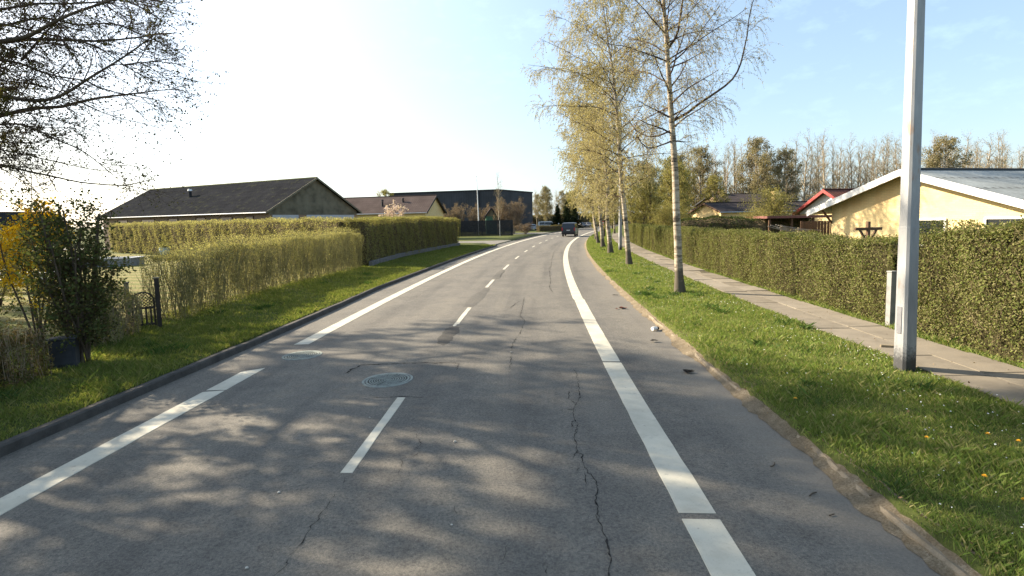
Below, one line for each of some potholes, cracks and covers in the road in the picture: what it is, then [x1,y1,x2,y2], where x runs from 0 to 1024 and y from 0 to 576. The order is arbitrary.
crack [275,479,345,575]
manhole cover [282,350,322,360]
crack [568,368,612,576]
manhole cover [362,372,413,388]
